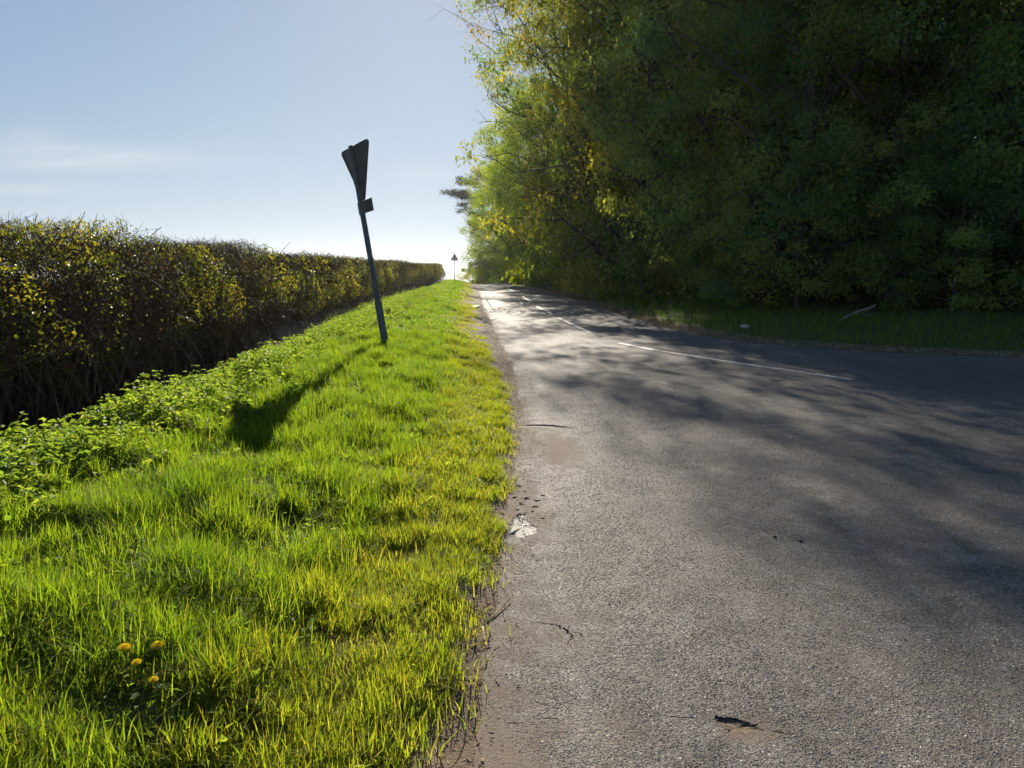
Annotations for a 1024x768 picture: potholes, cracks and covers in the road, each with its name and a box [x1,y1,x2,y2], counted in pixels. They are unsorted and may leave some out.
crack [530,622,584,645]
pothole [714,715,765,737]
pothole [503,479,546,539]
